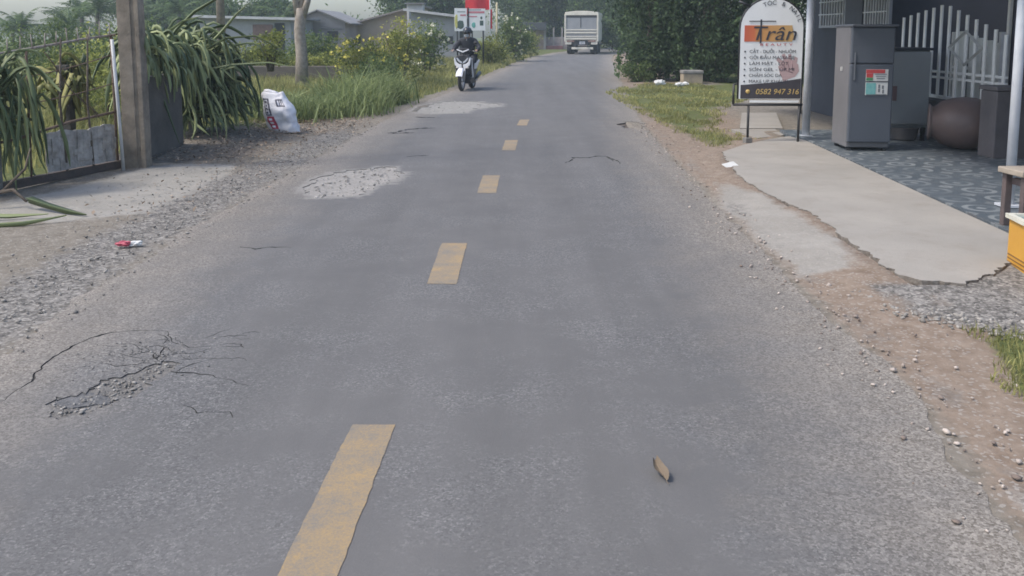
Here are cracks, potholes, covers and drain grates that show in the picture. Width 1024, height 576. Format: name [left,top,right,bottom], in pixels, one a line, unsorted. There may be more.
pothole [411,101,499,114]
crack [3,328,260,401]
pothole [302,167,404,198]
